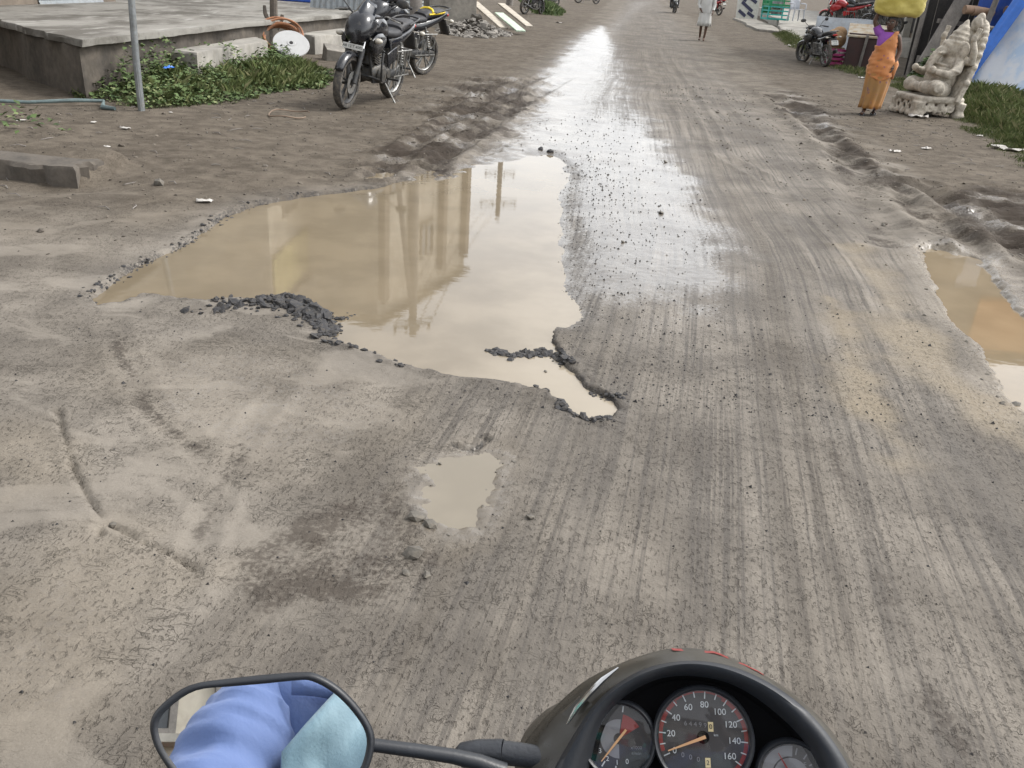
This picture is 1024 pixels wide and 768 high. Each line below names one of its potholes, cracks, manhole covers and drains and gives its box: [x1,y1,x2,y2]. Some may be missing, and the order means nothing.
pothole [77,155,631,425]
pothole [406,449,518,540]
pothole [909,239,1024,412]
